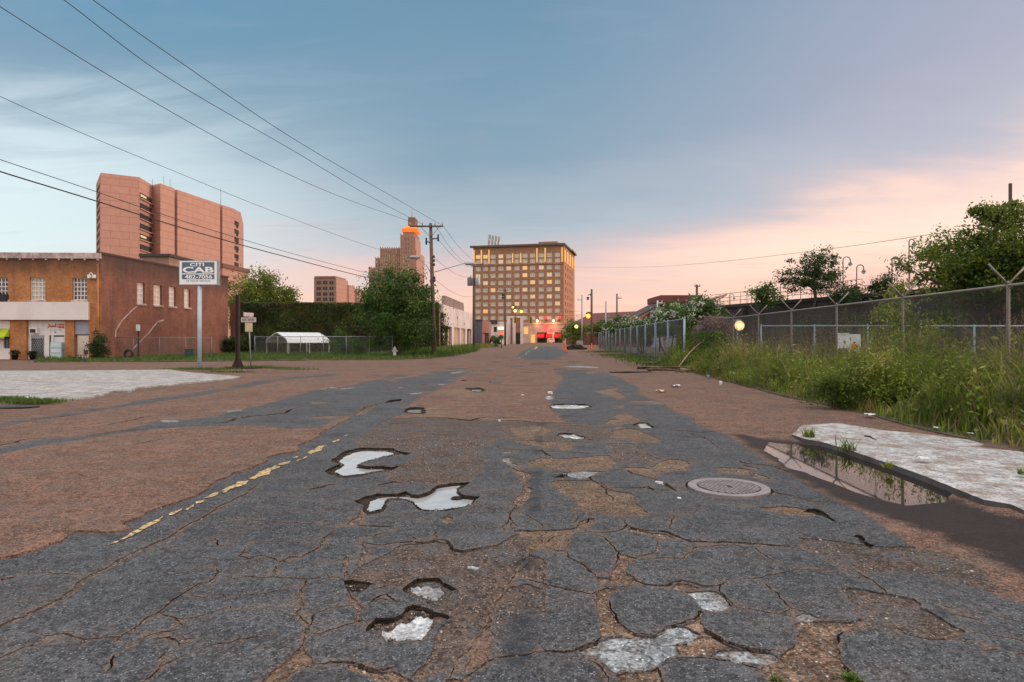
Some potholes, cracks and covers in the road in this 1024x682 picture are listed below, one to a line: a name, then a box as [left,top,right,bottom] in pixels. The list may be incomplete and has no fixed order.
pothole [325,448,410,478]
pothole [355,482,479,516]
pothole [403,578,457,604]
crack [0,405,945,682]
pothole [366,605,450,643]
crack [943,605,1024,654]
manhole cover [685,478,774,499]
